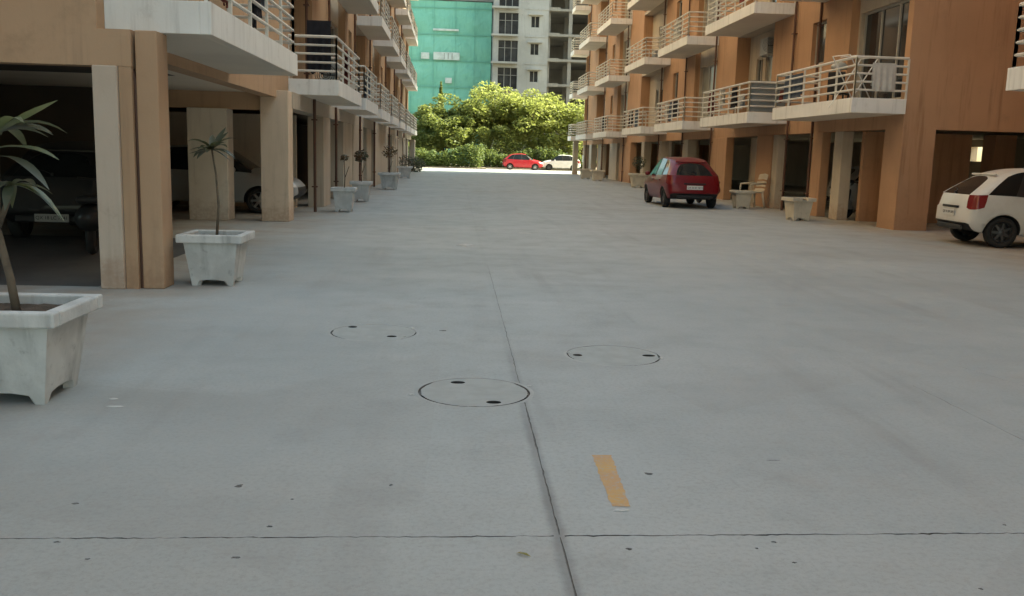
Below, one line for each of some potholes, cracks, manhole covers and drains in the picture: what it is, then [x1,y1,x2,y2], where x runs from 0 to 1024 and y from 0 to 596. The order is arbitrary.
manhole cover [327,324,419,342]
manhole cover [414,377,534,408]
manhole cover [563,345,664,367]
